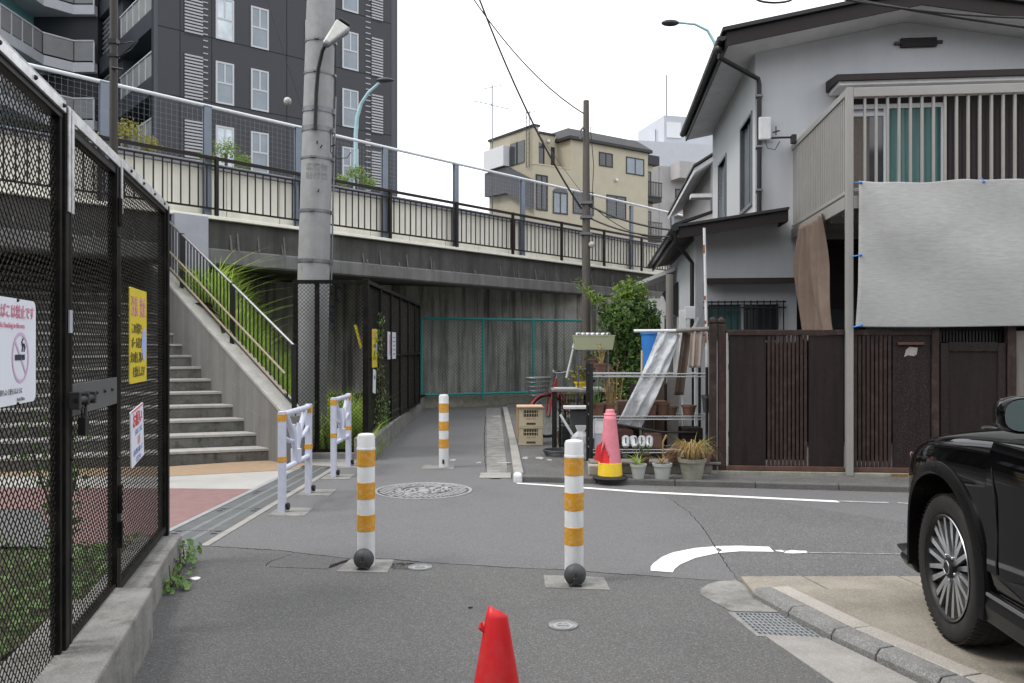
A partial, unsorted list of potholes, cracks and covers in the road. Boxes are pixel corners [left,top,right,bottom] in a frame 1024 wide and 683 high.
manhole cover [408,563,432,571]
crack [669,498,736,578]
manhole cover [375,482,472,500]
drain grate [735,612,821,637]
manhole cover [549,620,578,631]
